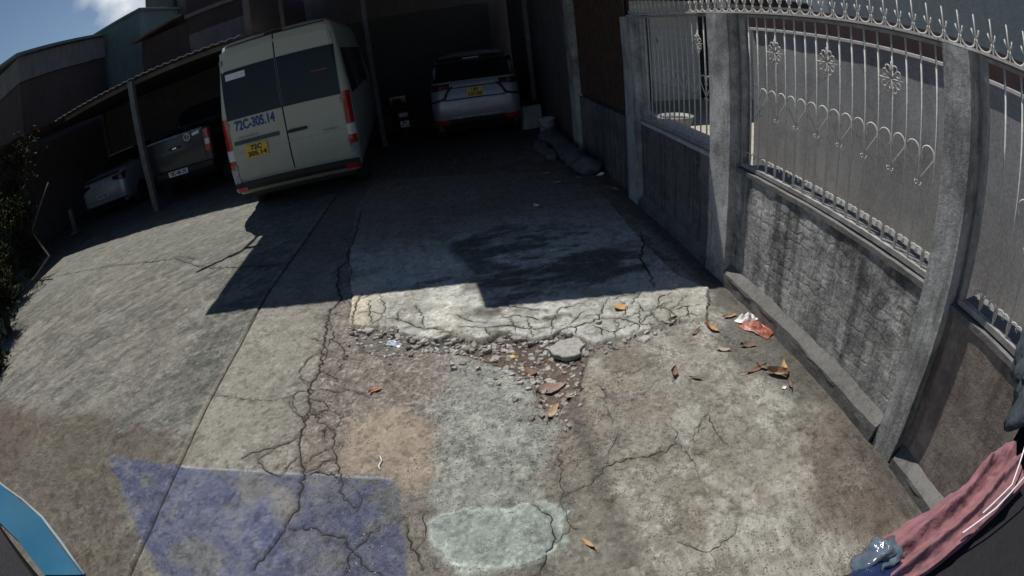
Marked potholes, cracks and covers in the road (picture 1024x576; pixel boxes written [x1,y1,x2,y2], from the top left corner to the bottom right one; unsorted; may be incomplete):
pothole [358,332,589,410]
crack [60,256,288,276]
crack [571,411,728,493]
crack [209,211,701,576]
